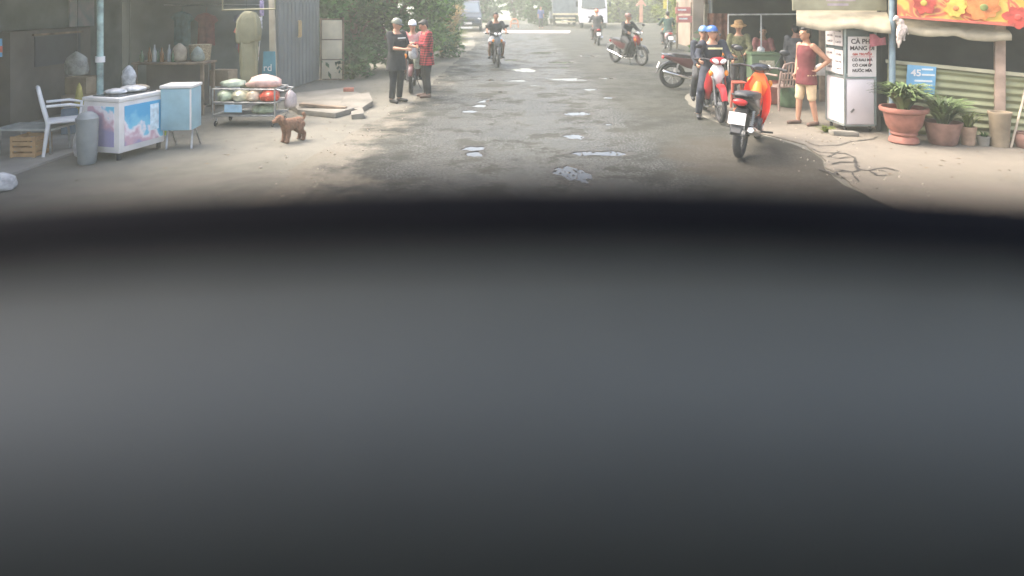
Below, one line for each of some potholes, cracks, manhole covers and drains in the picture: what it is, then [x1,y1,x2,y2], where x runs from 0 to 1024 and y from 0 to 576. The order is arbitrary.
crack [810,137,899,178]
